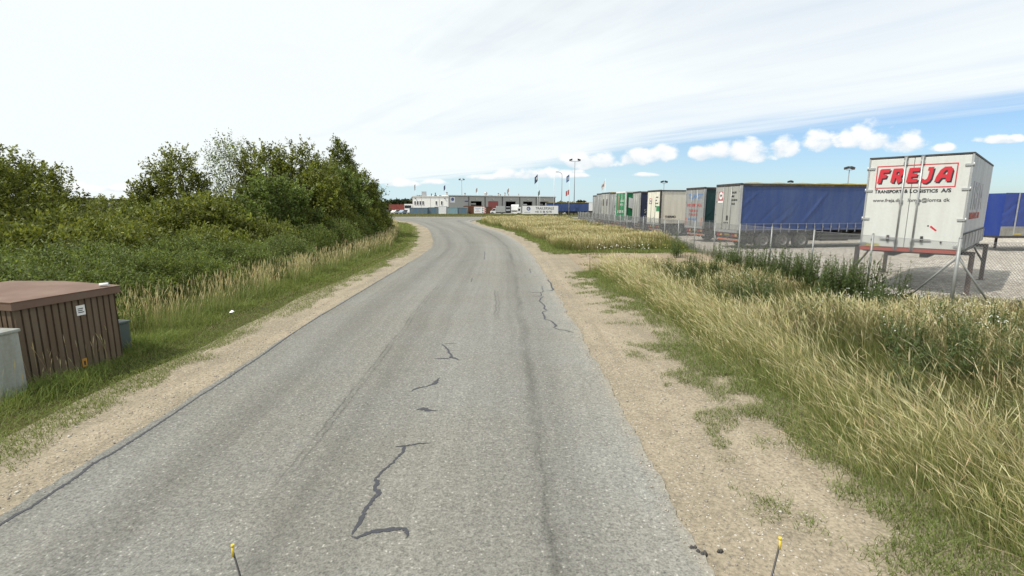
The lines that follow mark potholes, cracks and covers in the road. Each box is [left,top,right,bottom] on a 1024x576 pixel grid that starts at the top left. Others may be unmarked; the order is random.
crack [0,264,407,525]
crack [529,269,570,332]
